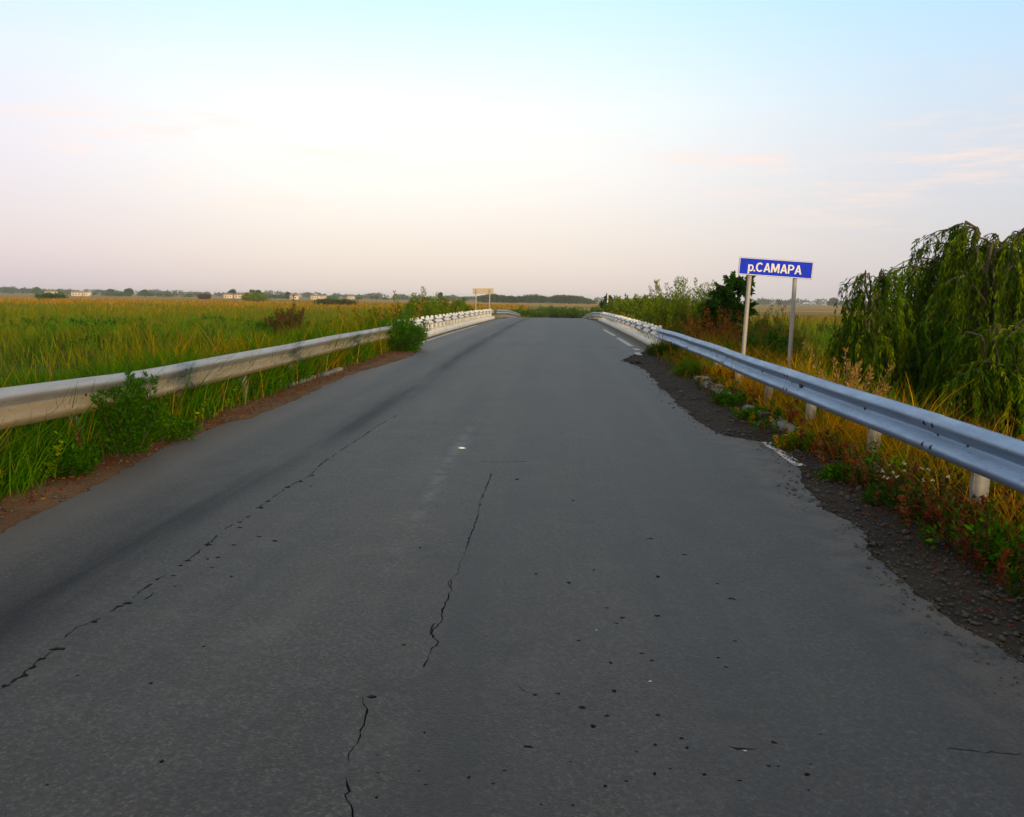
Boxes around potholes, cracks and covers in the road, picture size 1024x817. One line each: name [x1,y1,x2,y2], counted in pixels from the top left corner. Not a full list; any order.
crack [344,698,368,817]
crack [1,415,397,689]
crack [423,461,526,668]
crack [729,746,1022,755]
